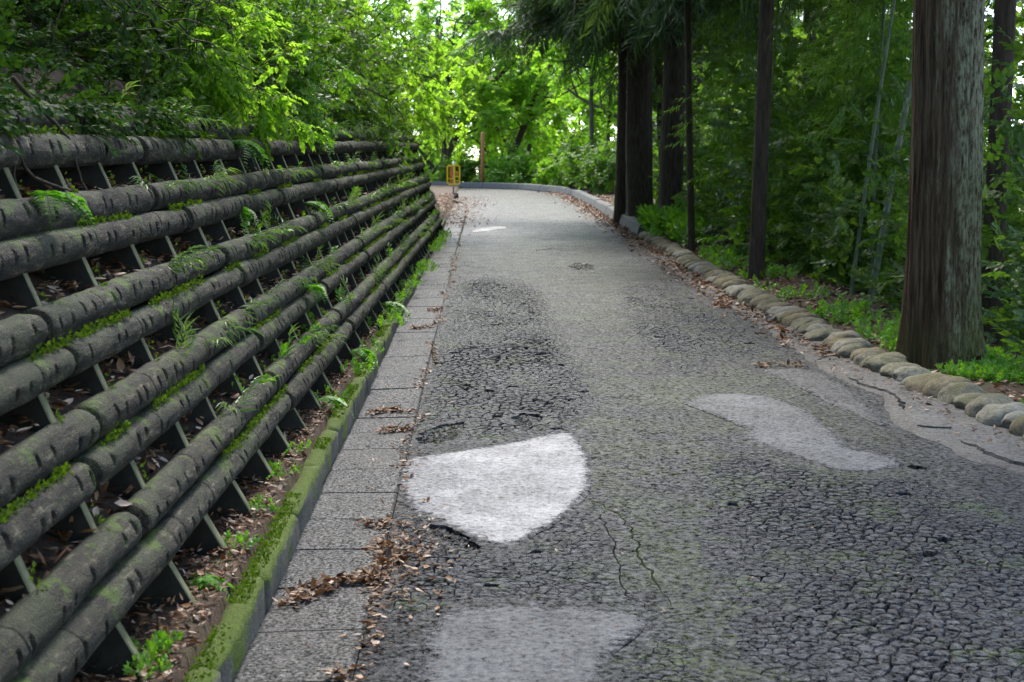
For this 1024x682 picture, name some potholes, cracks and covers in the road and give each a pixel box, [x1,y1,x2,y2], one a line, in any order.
crack [418,276,786,440]
pothole [426,523,481,551]
crack [629,377,1024,682]
crack [388,500,678,617]
